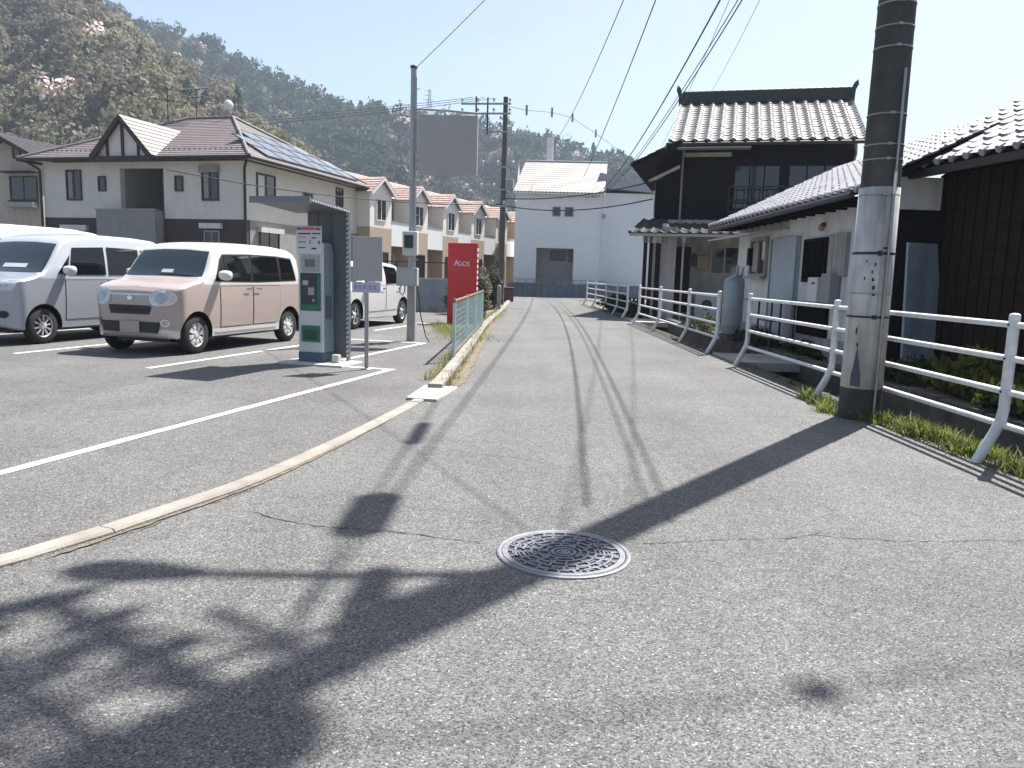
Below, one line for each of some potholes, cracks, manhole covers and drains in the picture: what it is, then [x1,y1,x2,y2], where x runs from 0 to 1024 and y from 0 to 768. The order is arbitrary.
crack [249,511,481,543]
manhole cover [496,530,631,580]
crack [642,532,1024,544]
